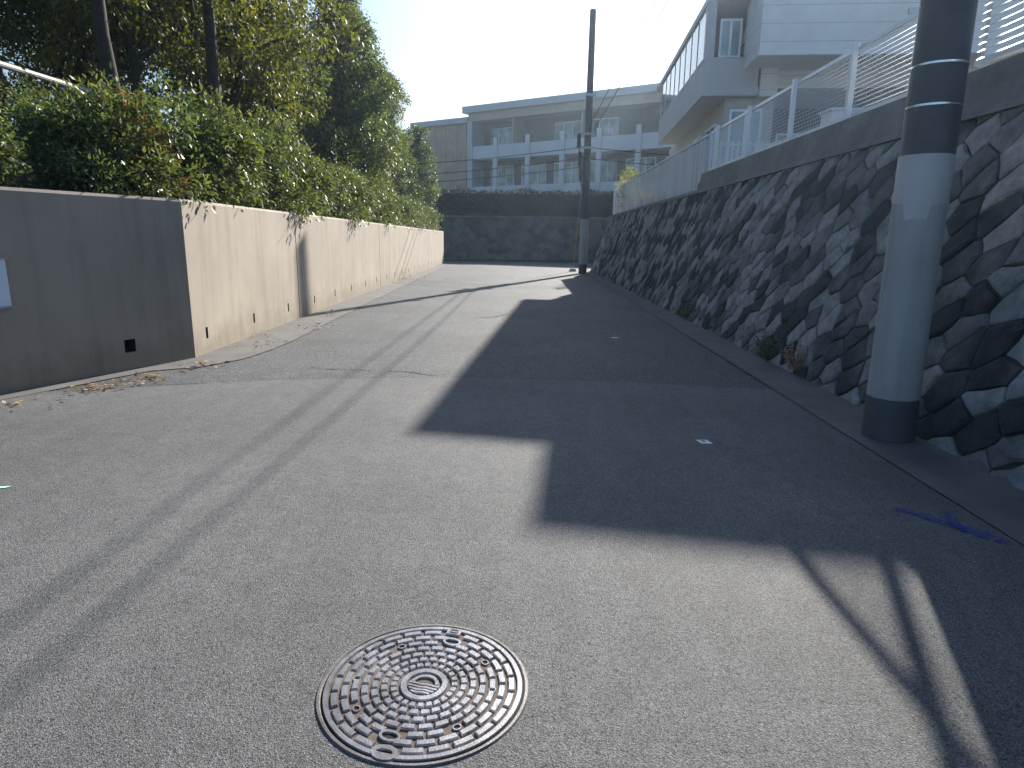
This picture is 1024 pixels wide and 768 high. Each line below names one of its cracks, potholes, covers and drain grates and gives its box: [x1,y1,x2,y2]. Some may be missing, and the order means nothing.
manhole cover [315,624,529,768]
